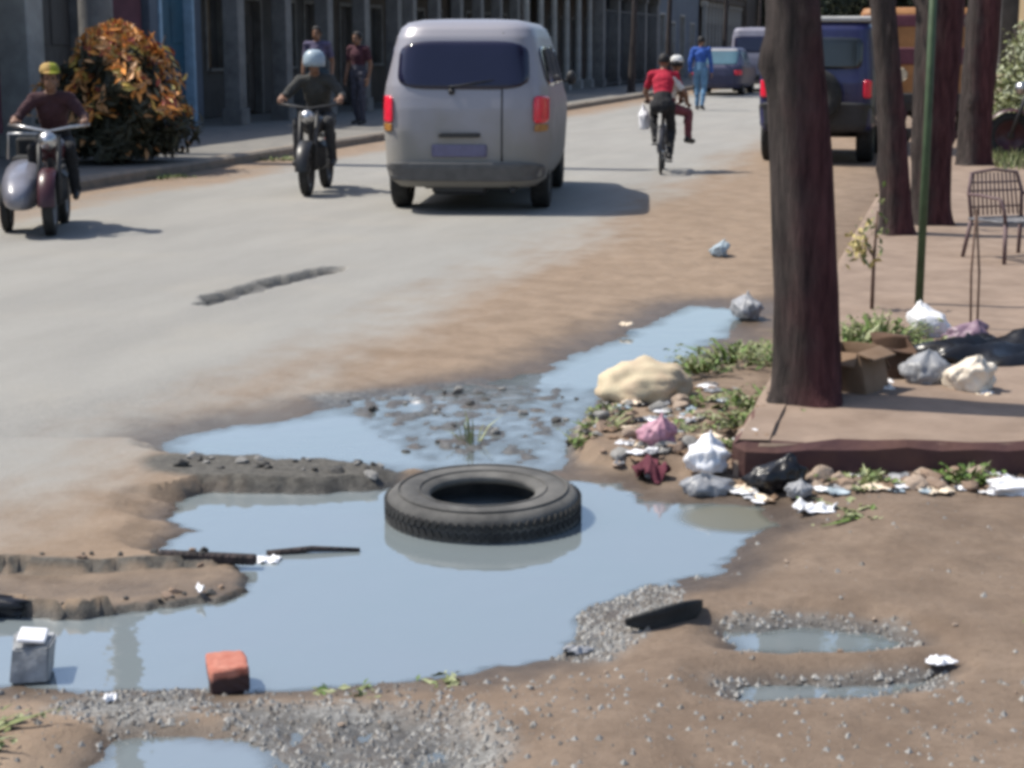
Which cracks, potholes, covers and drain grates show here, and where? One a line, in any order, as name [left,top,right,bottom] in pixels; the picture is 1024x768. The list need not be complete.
pothole [0,471,794,696]
